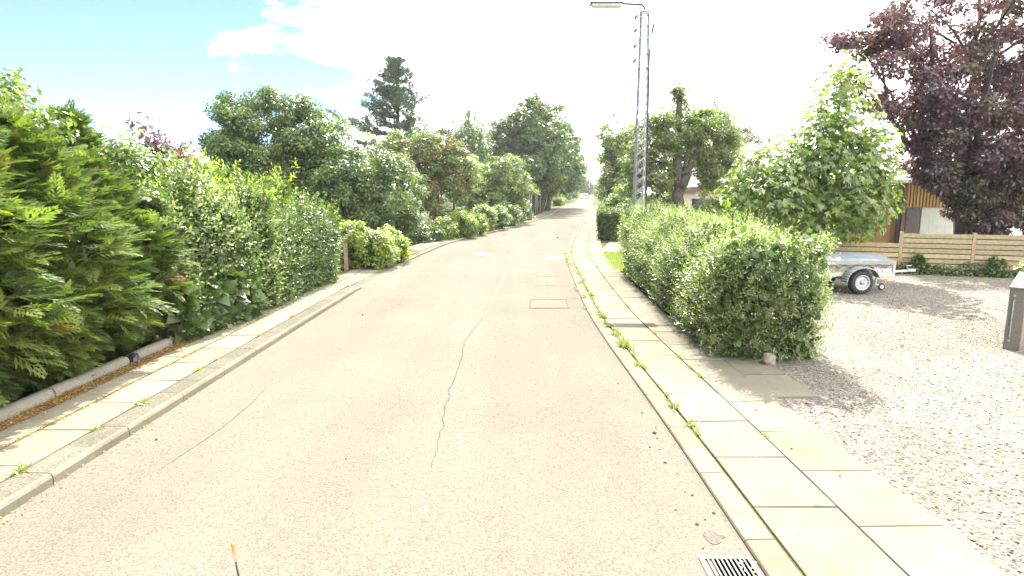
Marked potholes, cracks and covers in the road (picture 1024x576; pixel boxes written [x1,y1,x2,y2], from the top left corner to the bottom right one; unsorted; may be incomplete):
drain grate [698,556,763,576]
crack [431,324,478,467]
